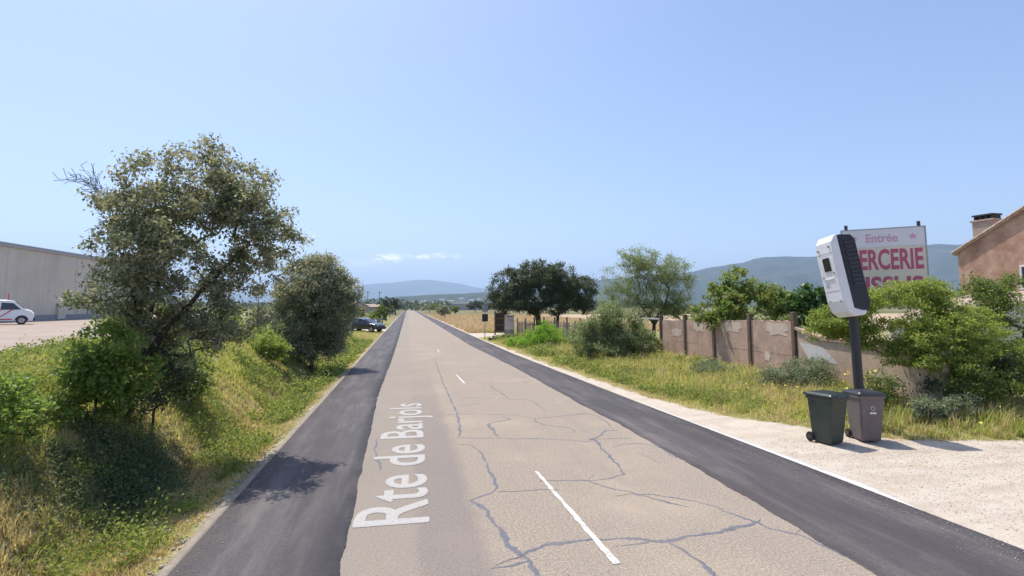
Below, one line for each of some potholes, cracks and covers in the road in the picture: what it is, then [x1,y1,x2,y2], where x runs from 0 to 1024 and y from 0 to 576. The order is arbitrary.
crack [434,359,848,576]
crack [373,440,382,471]
